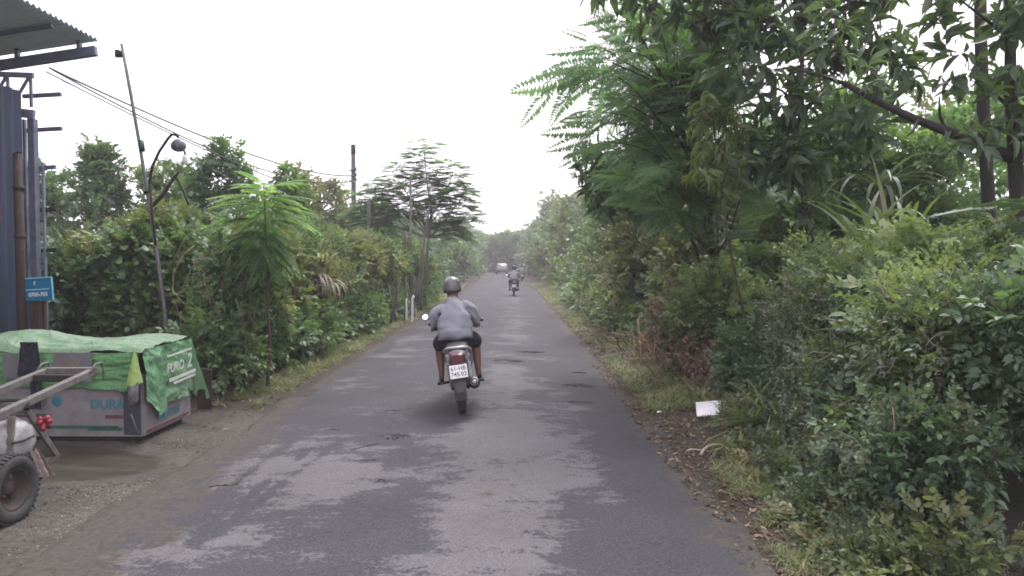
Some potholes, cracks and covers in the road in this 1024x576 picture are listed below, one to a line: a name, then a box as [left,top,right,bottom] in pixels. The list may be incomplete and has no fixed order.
pothole [375,433,412,441]
